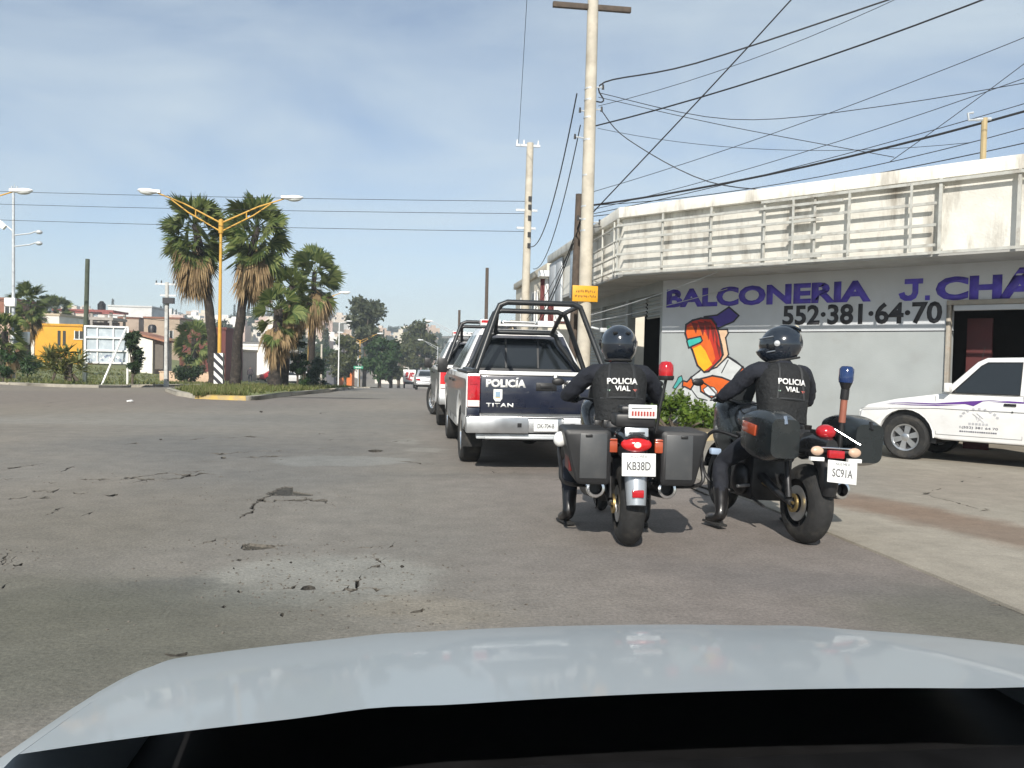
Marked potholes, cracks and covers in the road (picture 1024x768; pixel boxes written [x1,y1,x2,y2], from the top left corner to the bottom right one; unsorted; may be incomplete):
crack [239,493,335,519]
crack [918,477,988,512]
pothole [266,486,313,496]
crack [301,543,398,613]
crack [4,436,288,515]
